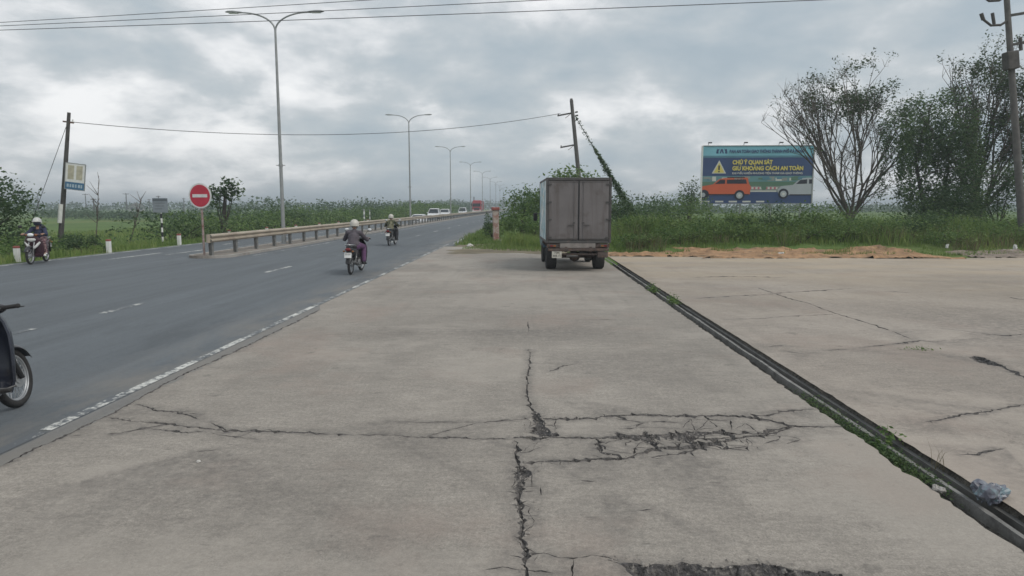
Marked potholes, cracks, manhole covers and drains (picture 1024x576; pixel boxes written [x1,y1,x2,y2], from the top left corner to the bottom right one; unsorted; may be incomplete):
pothole [616,562,843,576]
crack [999,364,1024,378]
crack [109,325,842,576]
crack [927,404,1024,423]
